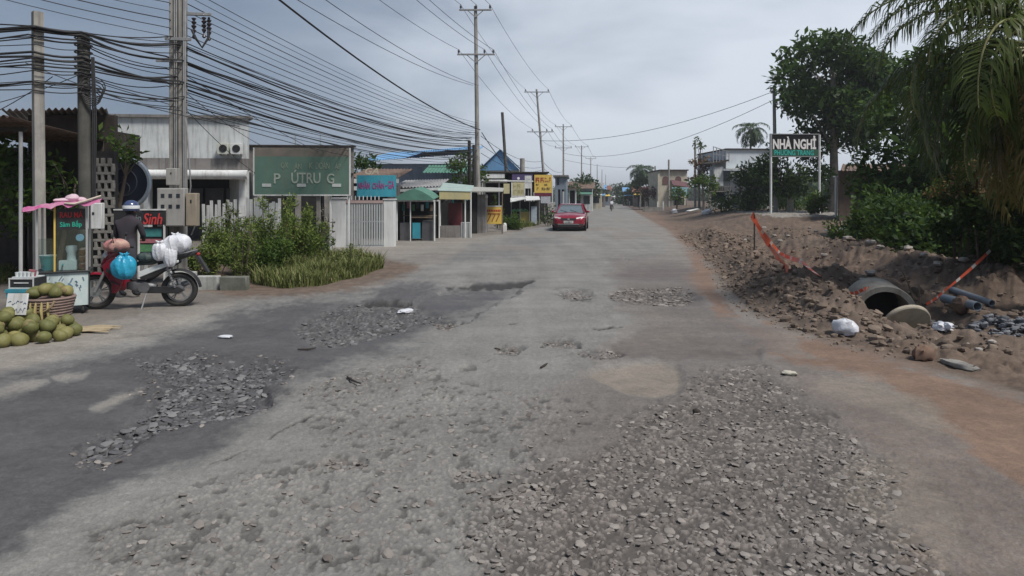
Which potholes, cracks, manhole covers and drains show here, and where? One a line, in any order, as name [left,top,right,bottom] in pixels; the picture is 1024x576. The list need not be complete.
pothole [432,318,459,331]
crack [266,403,362,440]
pothole [594,282,702,309]
pothole [554,288,597,301]
pothole [490,342,528,356]
pothole [74,354,294,464]
pothole [536,336,582,349]
pothole [568,345,627,360]
pothole [290,297,450,349]
